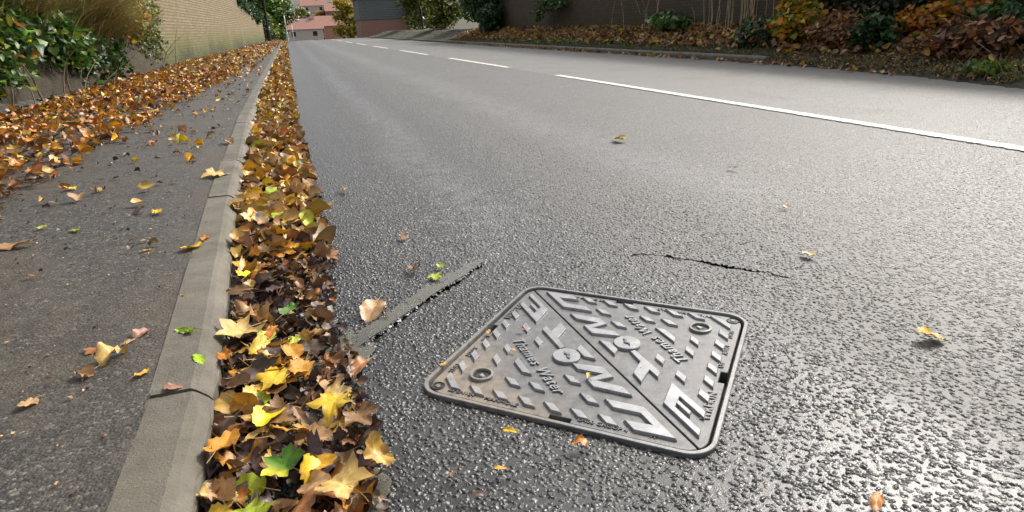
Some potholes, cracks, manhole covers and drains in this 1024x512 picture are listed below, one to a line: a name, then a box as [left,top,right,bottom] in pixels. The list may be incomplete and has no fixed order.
manhole cover [424,286,748,458]
crack [631,253,790,279]
